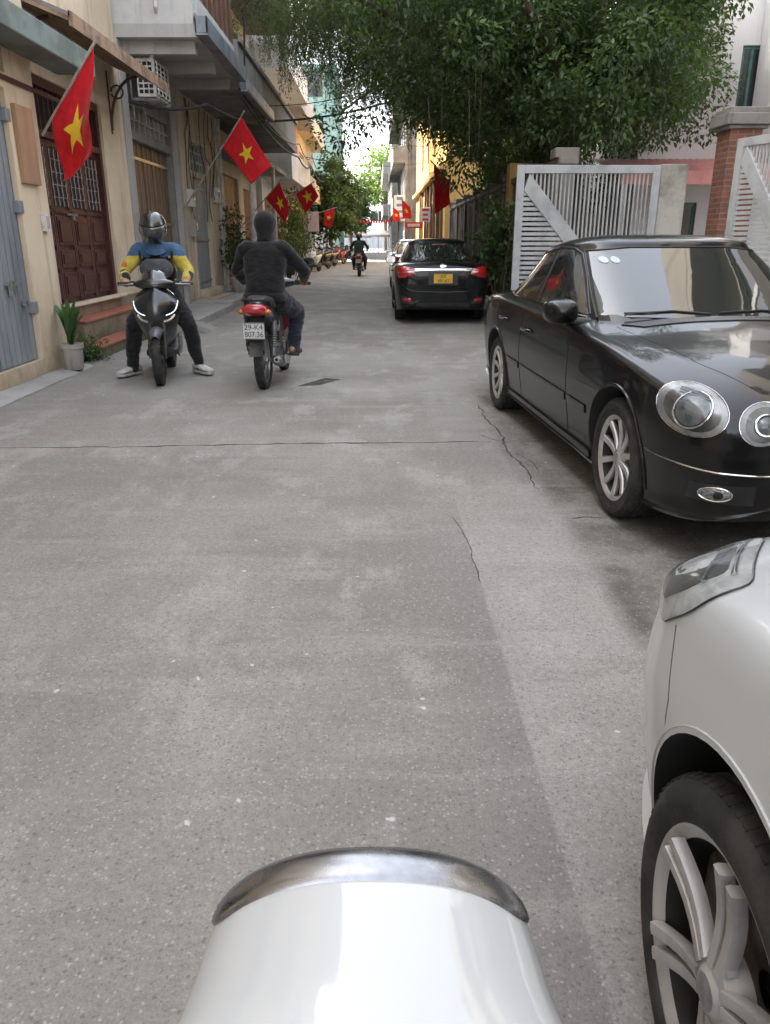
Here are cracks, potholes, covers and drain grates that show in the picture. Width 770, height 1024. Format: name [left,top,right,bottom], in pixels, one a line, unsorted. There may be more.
crack [452,517,481,583]
crack [20,407,563,486]
